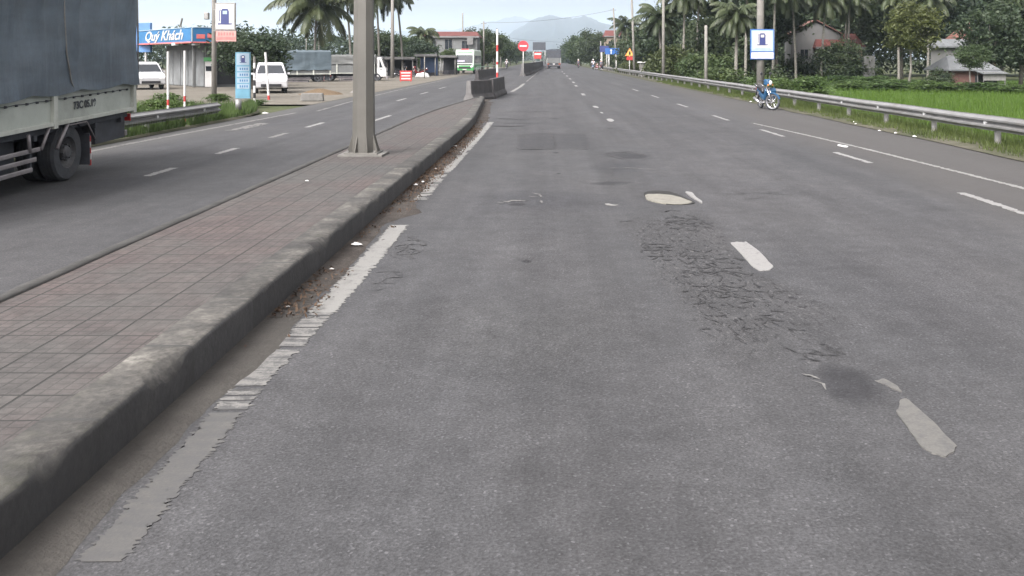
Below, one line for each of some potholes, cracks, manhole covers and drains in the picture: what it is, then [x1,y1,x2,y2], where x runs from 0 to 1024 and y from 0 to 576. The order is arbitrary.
manhole cover [644,190,695,205]
crack [640,210,845,389]
crack [372,236,427,290]
